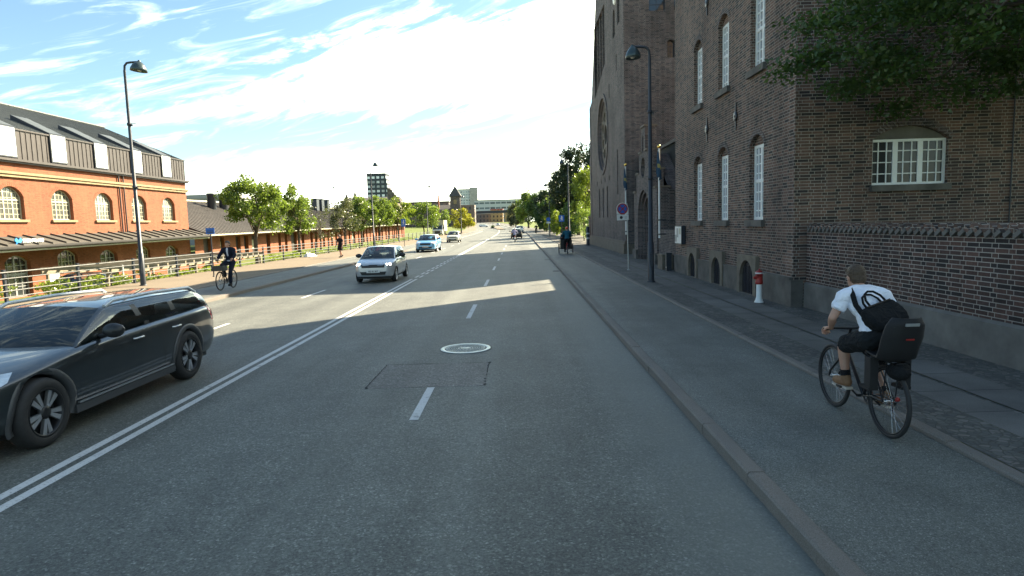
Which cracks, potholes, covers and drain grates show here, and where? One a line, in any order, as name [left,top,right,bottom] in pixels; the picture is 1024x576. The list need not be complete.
manhole cover [440,343,492,354]
